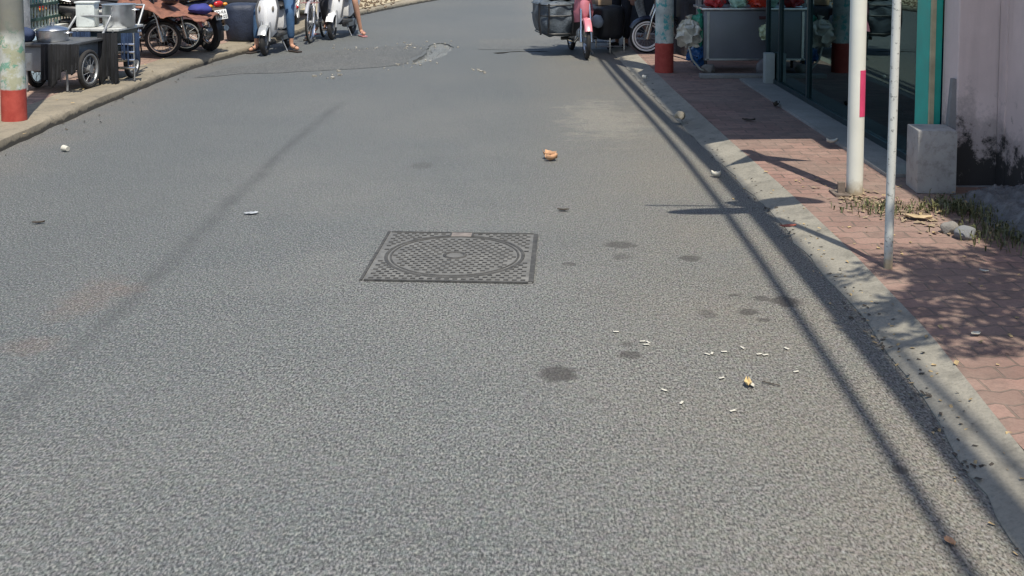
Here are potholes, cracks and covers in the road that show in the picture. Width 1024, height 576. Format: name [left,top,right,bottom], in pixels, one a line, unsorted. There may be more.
pothole [412,43,454,65]
manhole cover [359,231,538,284]
